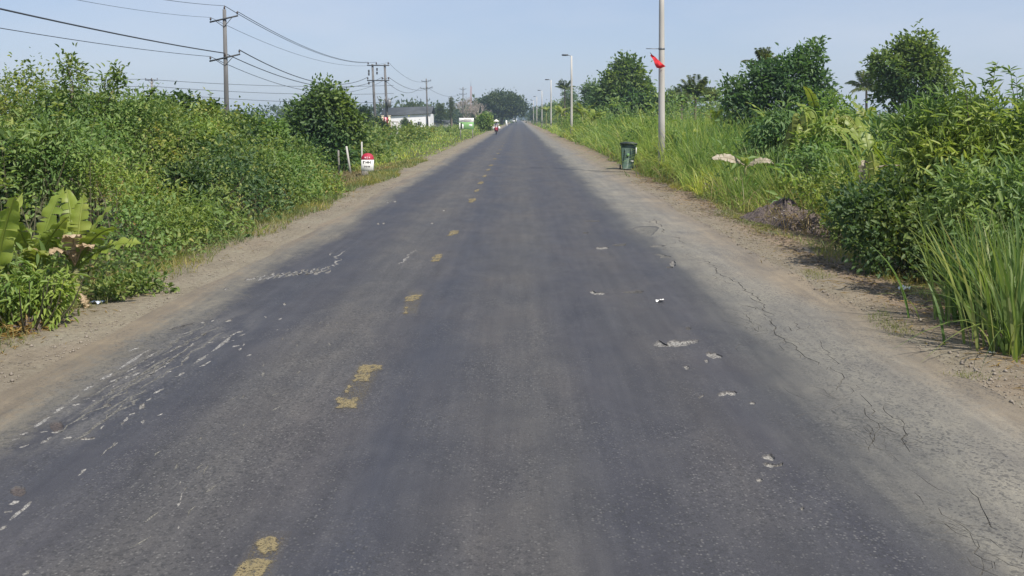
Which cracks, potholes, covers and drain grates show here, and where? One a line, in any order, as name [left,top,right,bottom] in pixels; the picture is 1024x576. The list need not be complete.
crack [627,217,1023,576]
pothole [653,339,699,347]
